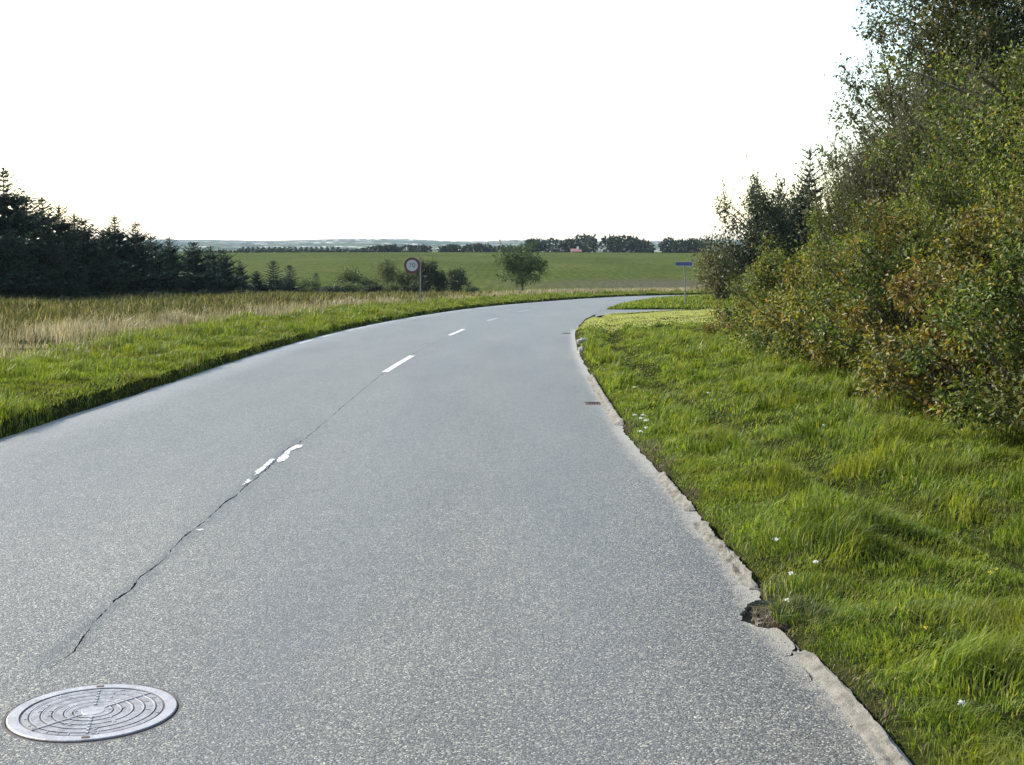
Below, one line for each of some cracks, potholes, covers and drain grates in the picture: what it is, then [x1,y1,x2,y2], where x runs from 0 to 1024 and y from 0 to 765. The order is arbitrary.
manhole cover [2,684,182,744]
pothole [740,600,791,633]
crack [54,349,422,666]
